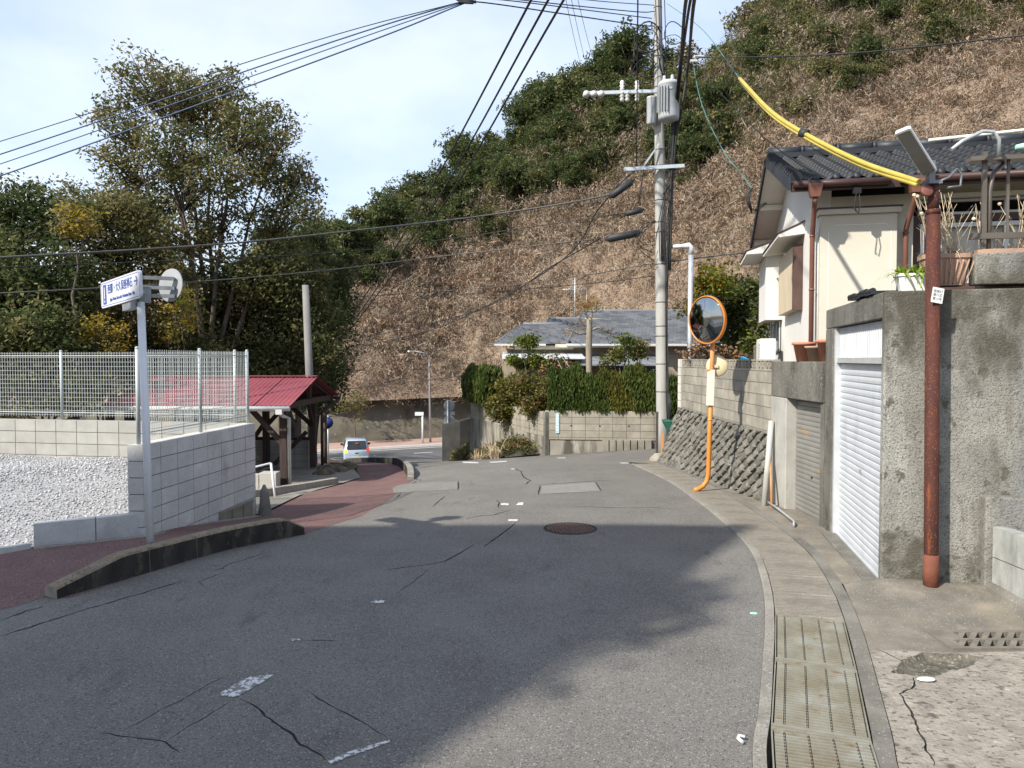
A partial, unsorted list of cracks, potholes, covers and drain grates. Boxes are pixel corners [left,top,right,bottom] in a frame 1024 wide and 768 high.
crack [107,677,386,760]
drain grate [771,659,871,740]
pothole [891,652,984,677]
crack [384,501,515,595]
drain grate [771,727,879,768]
crack [2,553,264,636]
crack [876,648,935,765]
manhole cover [543,522,597,535]
drain grate [775,613,856,670]
